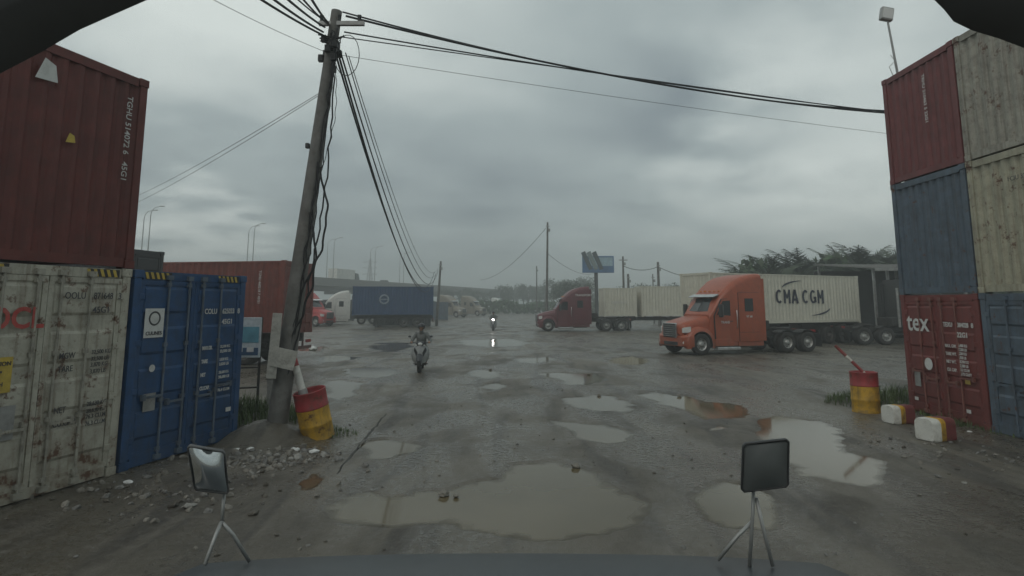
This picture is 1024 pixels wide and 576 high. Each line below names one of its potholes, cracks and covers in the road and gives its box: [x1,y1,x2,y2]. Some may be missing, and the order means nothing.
pothole [684,478,789,531]
pothole [534,371,614,386]
pothole [445,338,538,347]
pothole [318,379,369,407]
pothole [605,356,655,365]
pothole [458,368,509,380]
pothole [353,437,431,460]
crack [337,414,386,474]
pothole [751,414,895,487]
pothole [320,458,658,543]
pothole [546,419,636,445]
pothole [558,394,642,412]
